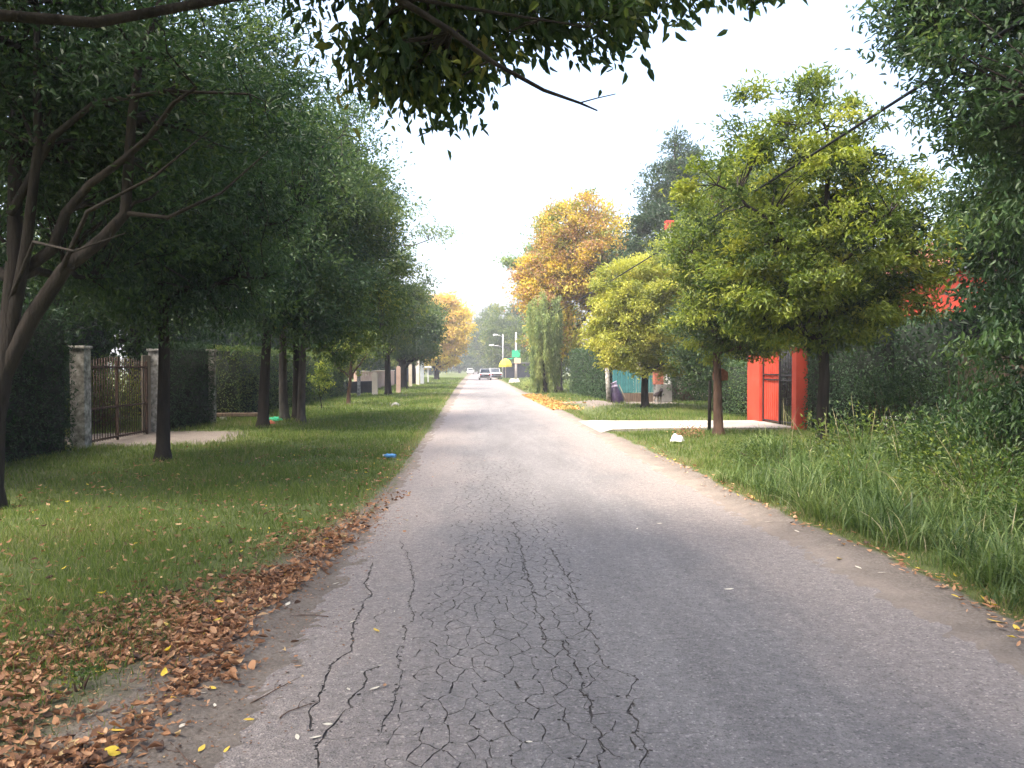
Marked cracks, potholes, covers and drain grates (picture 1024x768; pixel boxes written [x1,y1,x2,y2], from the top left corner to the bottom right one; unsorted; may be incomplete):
crack [303,452,694,768]
